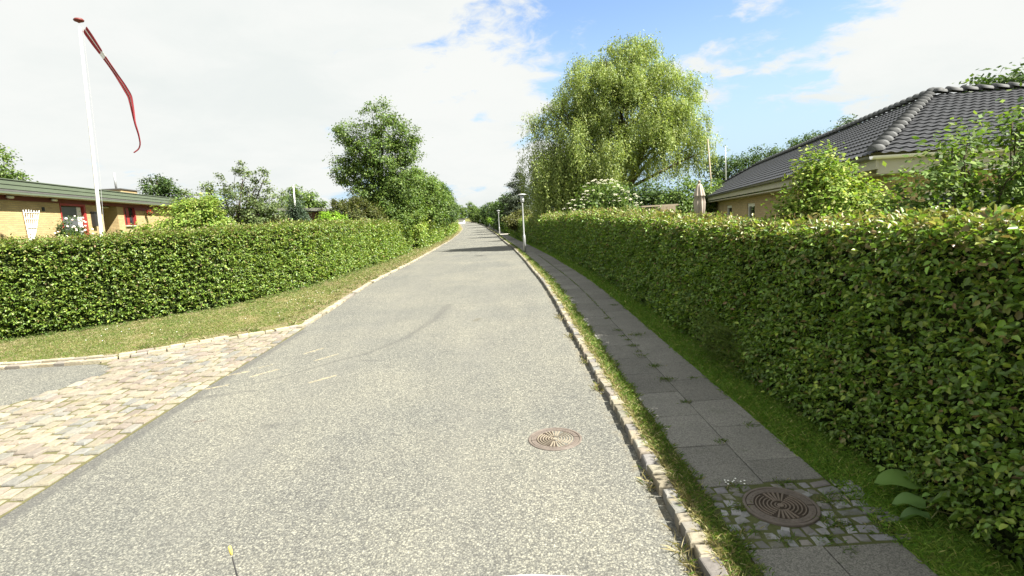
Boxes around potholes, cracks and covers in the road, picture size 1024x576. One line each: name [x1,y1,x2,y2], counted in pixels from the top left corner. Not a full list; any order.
manhole cover [528,427,582,451]
manhole cover [742,487,821,527]
